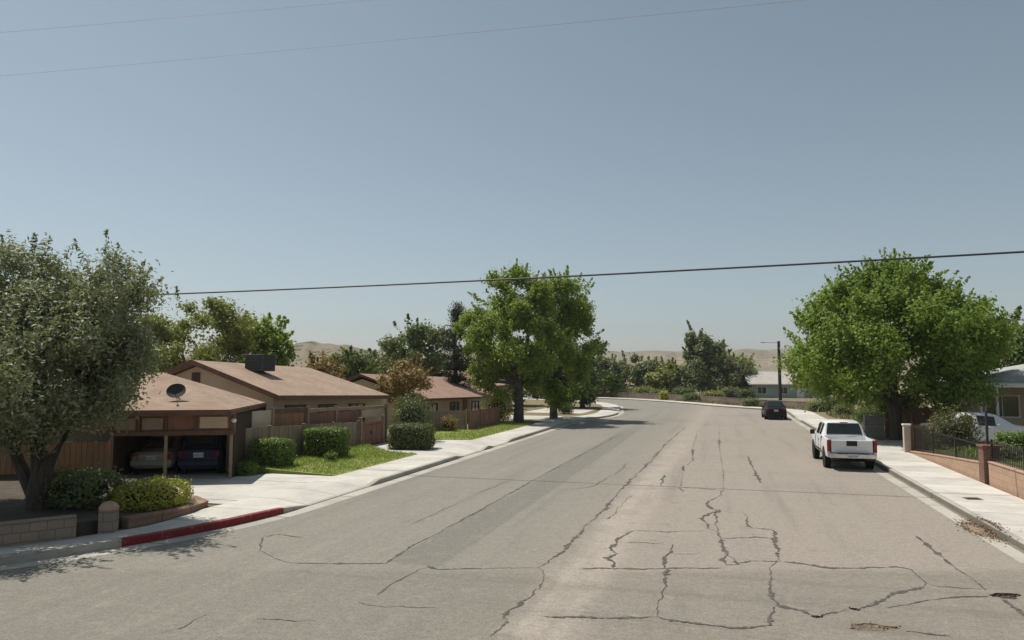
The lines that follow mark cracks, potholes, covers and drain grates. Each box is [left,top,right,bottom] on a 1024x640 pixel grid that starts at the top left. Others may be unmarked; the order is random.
crack [358,428,1024,636]
pothole [849,622,901,631]
